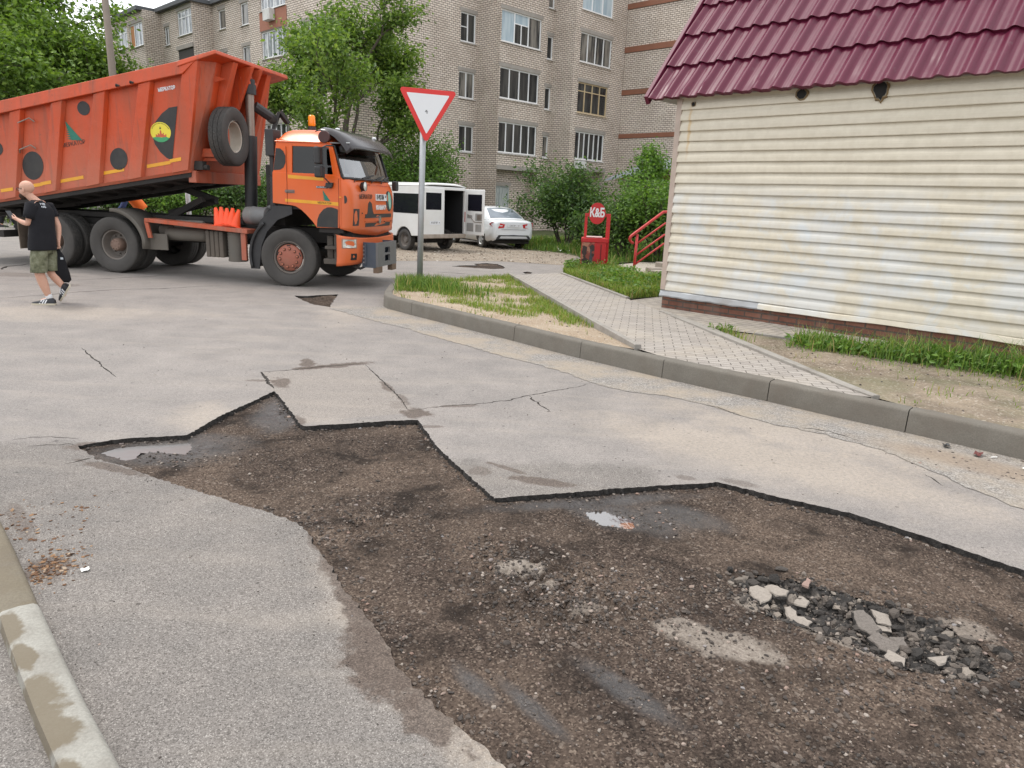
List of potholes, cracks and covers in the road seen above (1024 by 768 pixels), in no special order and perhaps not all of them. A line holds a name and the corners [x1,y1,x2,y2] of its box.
pothole [78,391,1024,768]
crack [419,384,586,410]
pothole [296,294,338,307]
